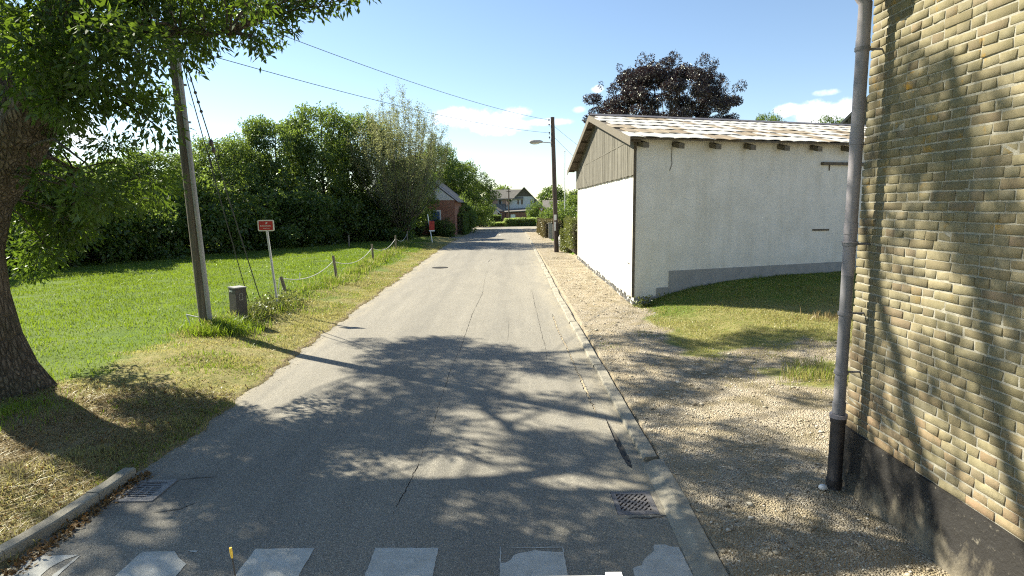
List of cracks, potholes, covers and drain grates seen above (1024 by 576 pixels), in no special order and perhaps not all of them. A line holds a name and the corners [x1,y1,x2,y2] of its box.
drain grate [610,491,660,515]
crack [532,293,597,413]
crack [393,259,492,513]
drain grate [113,479,178,503]
